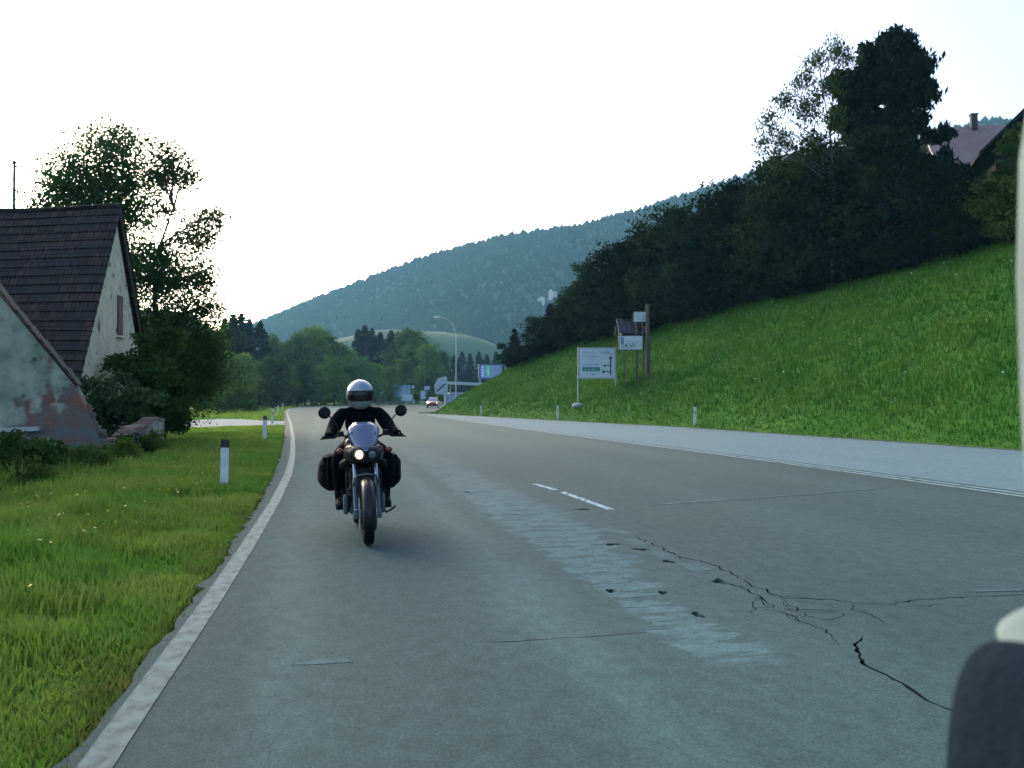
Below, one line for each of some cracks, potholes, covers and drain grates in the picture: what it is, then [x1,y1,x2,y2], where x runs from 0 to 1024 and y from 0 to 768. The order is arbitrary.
crack [638,537,1007,711]
